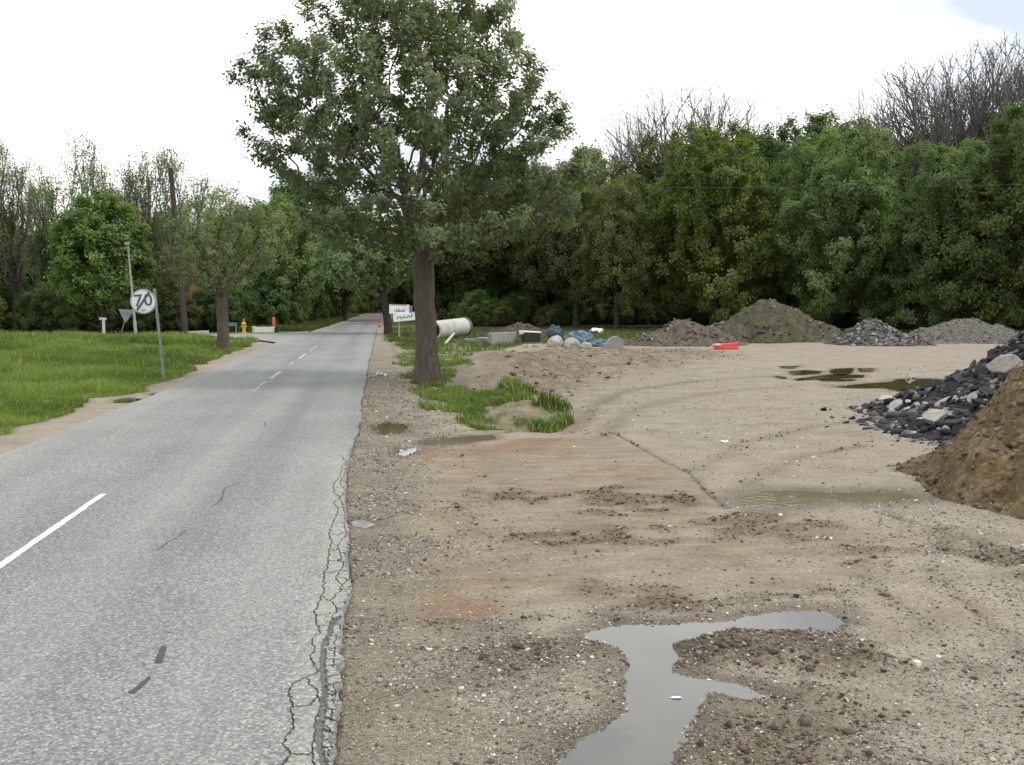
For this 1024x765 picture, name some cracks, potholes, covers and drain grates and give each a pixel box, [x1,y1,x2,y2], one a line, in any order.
crack [280,454,350,765]
